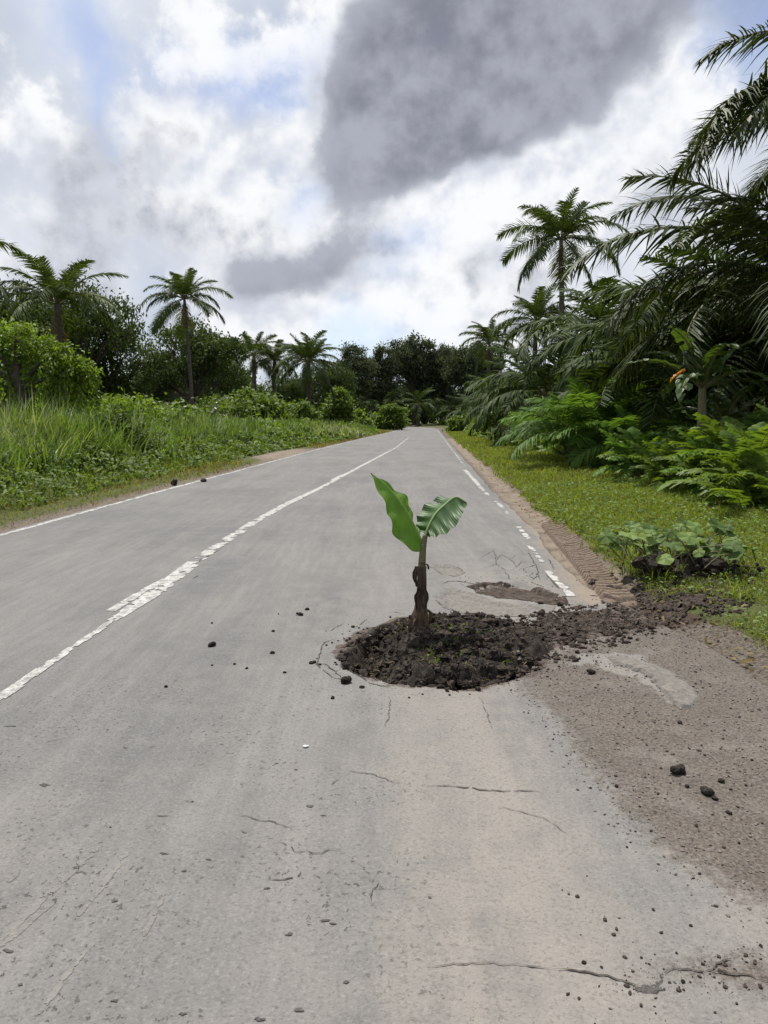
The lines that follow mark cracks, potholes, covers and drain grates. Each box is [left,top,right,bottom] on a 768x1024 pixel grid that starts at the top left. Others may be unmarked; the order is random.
crack [429,785,570,835]
crack [438,548,564,611]
pothole [466,581,568,605]
crack [241,815,340,853]
pothole [344,618,532,691]
crack [316,624,391,726]
crack [437,961,637,985]
crack [665,958,766,981]
